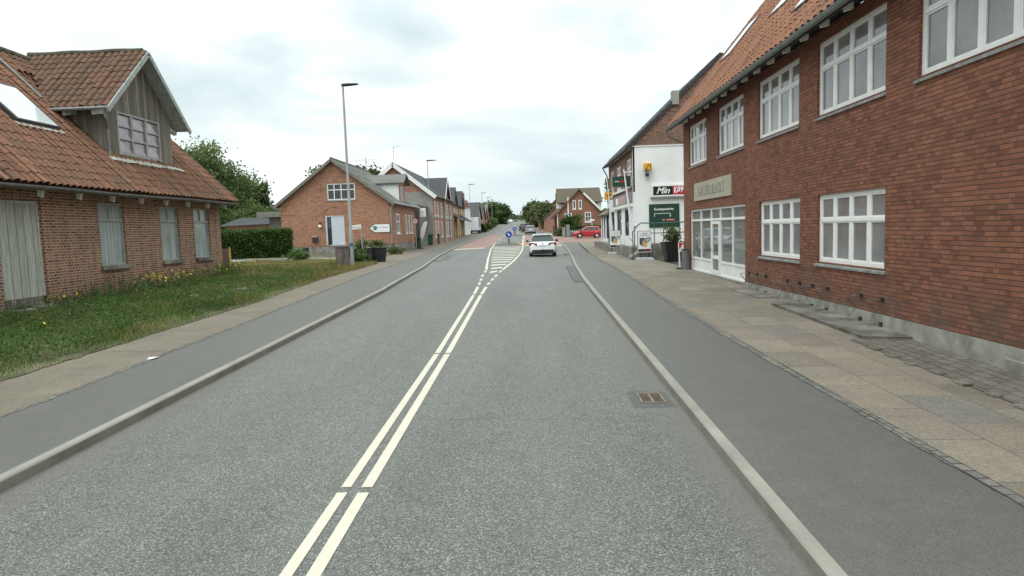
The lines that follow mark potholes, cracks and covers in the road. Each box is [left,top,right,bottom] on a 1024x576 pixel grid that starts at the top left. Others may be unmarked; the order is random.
drain grate [636,393,666,403]
